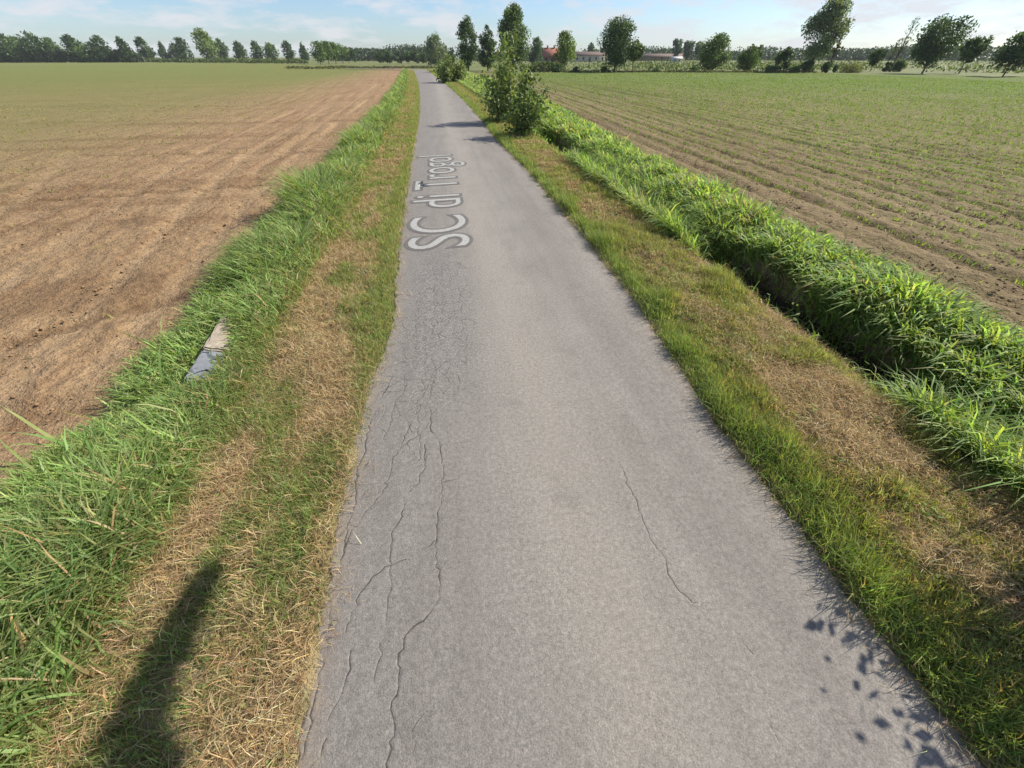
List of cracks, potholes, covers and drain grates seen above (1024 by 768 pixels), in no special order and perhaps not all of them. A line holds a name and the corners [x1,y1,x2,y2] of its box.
crack [301,254,490,768]
crack [622,469,698,603]
